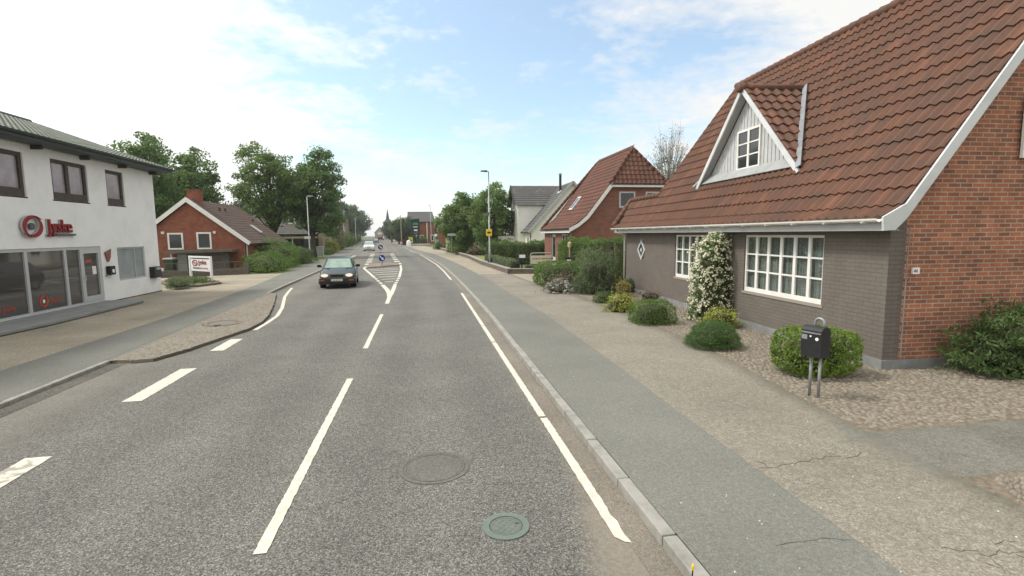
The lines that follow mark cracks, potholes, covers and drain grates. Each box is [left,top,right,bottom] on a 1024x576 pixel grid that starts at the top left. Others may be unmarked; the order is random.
manhole cover [482,512,530,541]
crack [946,540,1024,573]
manhole cover [399,452,470,485]
